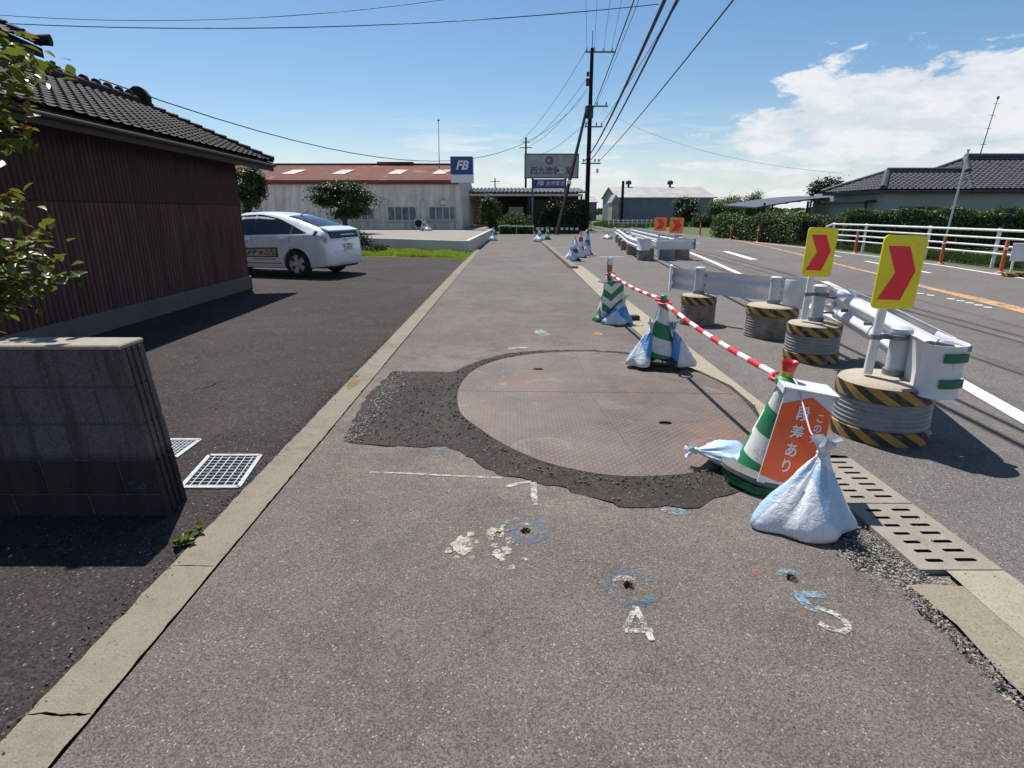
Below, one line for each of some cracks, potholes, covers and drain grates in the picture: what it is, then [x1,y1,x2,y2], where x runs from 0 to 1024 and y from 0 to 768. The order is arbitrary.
manhole cover [457,351,758,477]
drain grate [170,438,202,459]
drain grate [183,454,263,489]
